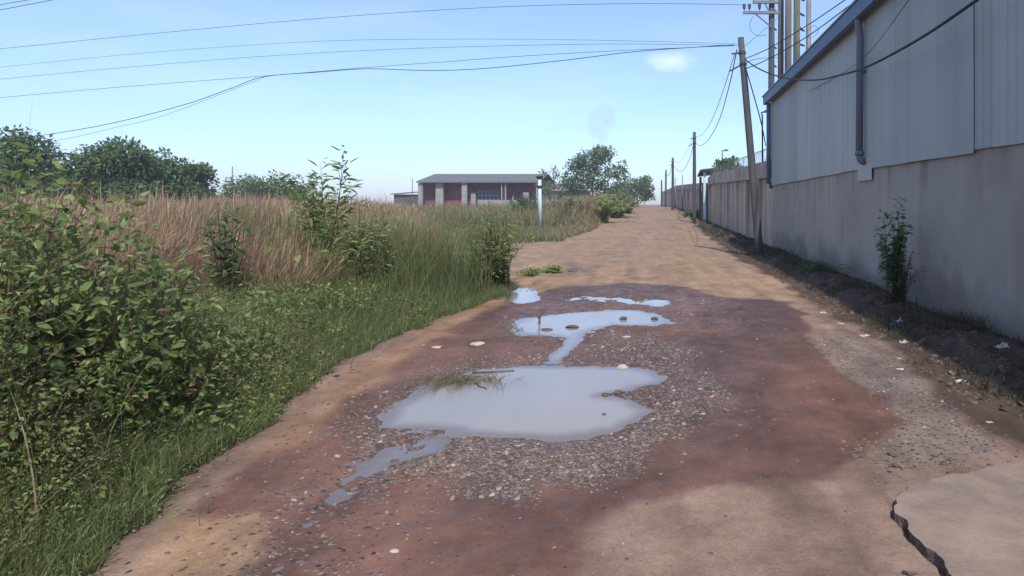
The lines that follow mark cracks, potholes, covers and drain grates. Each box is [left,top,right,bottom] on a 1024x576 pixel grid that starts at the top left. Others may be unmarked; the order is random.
pothole [498,283,544,304]
pothole [365,363,676,445]
crack [883,489,945,576]
pothole [502,309,678,364]
